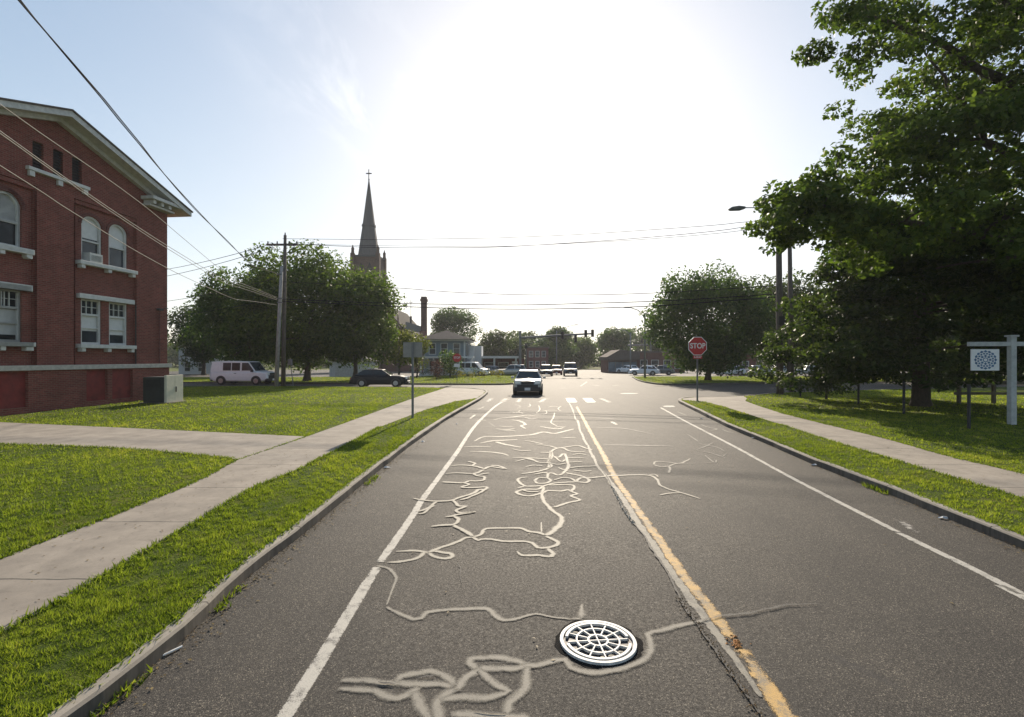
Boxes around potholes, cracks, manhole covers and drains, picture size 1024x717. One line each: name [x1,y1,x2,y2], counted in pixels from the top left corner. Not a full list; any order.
crack [389,404,700,583]
